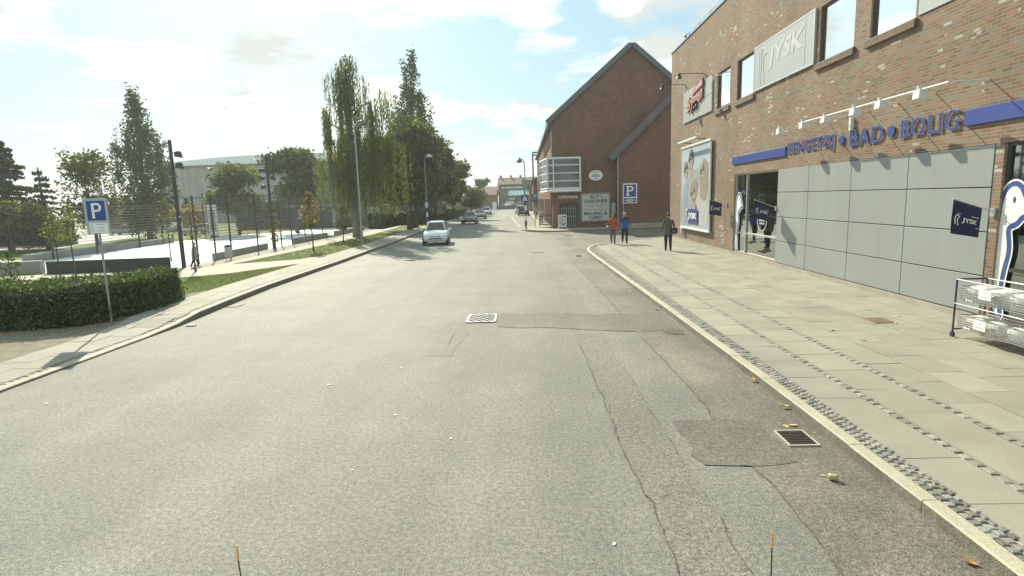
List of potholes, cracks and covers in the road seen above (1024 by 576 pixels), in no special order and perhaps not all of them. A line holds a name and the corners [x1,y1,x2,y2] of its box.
crack [579,344,680,576]
drain grate [773,429,821,447]
